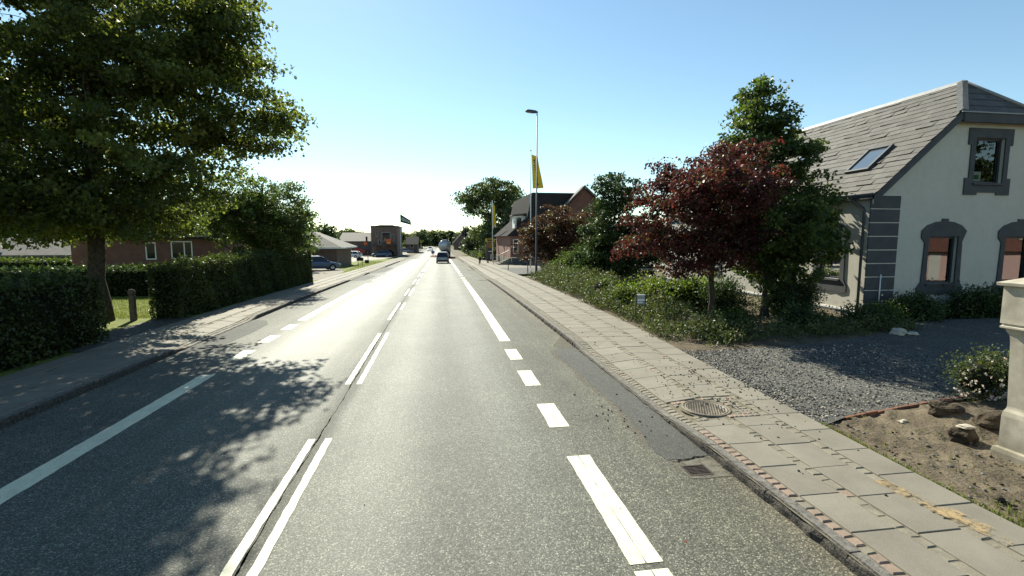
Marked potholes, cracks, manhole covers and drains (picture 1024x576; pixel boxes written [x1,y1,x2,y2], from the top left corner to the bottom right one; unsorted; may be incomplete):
drain grate [680,464,714,476]
manhole cover [679,400,732,419]
